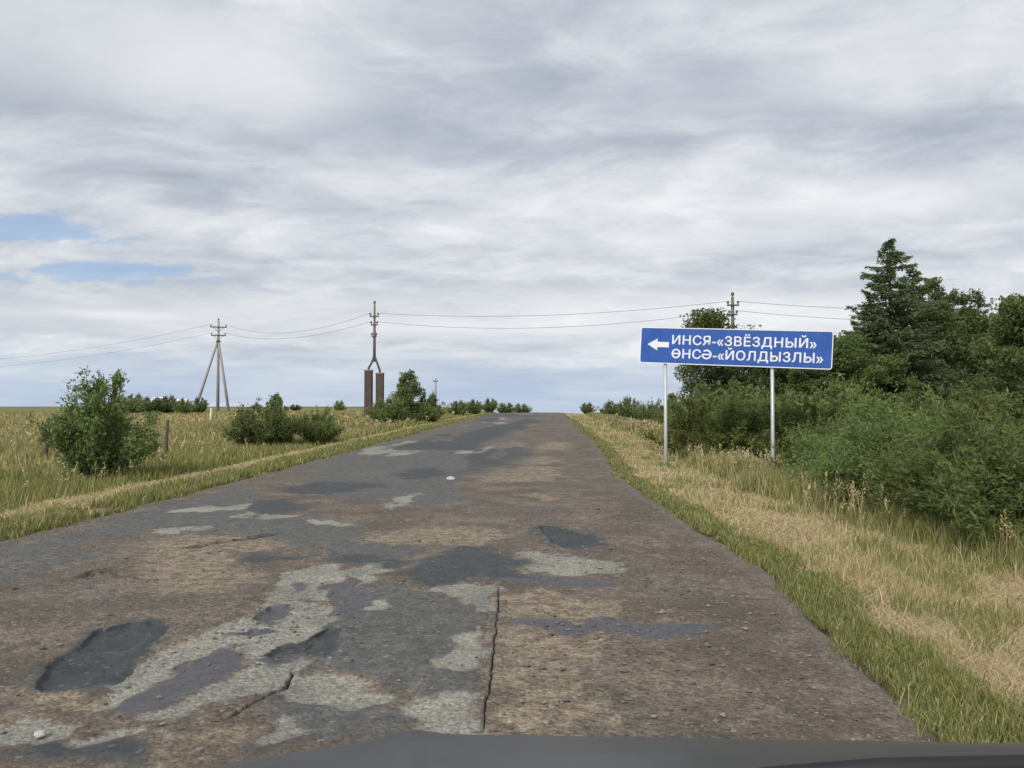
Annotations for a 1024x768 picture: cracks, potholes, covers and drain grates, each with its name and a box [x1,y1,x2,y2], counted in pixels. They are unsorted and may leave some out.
crack [469,586,508,733]
crack [212,667,305,723]
